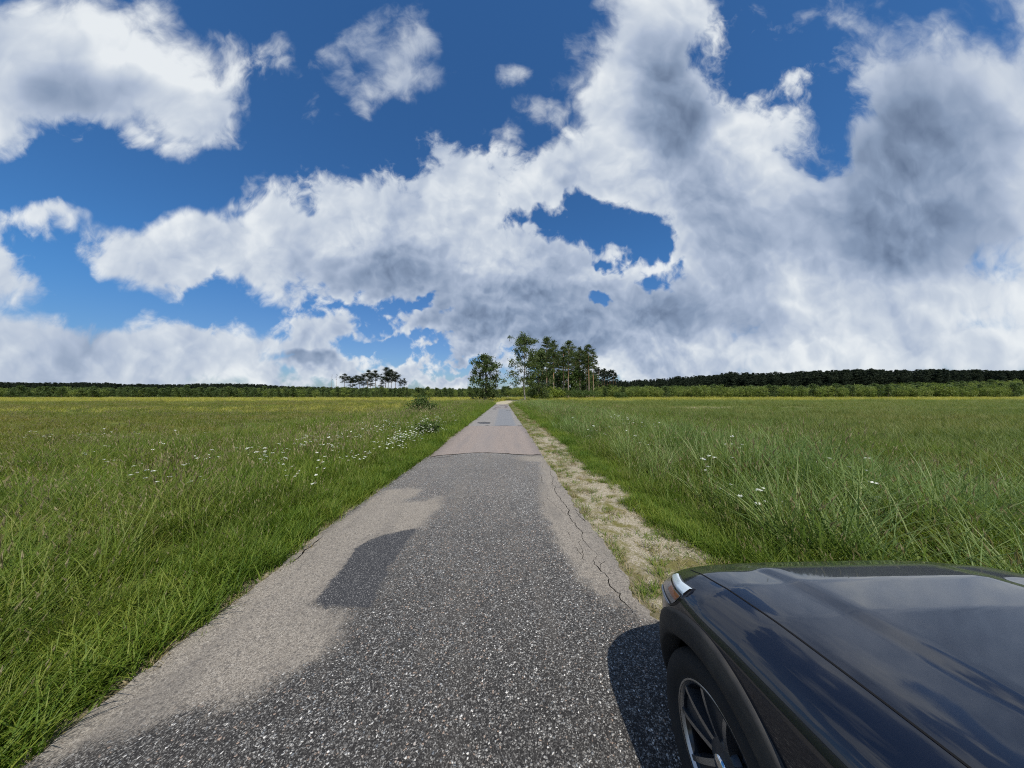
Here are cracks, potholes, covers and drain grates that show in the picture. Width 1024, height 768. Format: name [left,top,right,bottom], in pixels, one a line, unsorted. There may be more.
crack [541,466,637,616]
